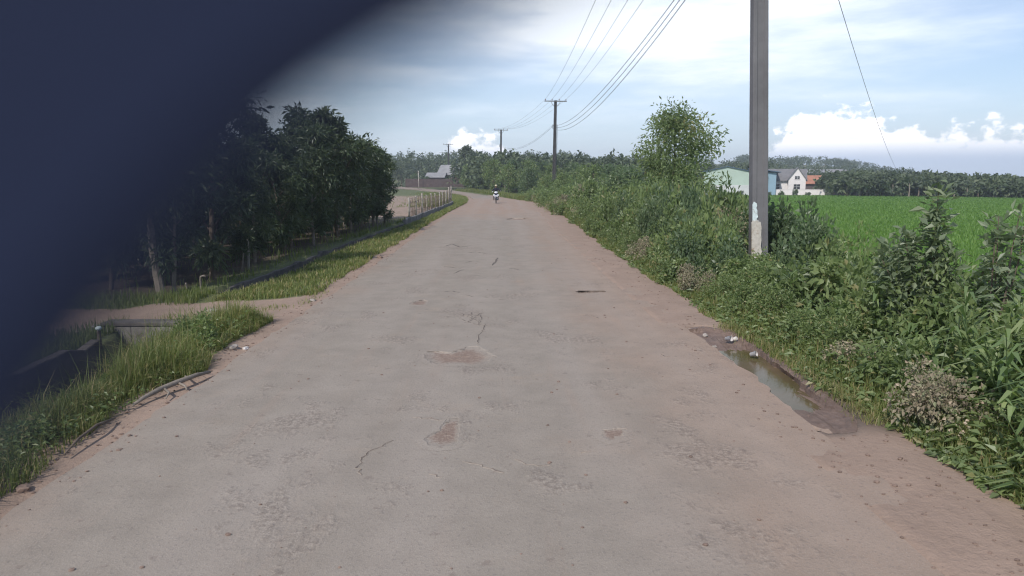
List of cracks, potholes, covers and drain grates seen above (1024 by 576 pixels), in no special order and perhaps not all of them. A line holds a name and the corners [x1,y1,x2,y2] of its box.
pothole [415,414,471,451]
crack [463,459,551,473]
crack [353,440,393,475]
pothole [688,326,858,434]
crack [443,244,520,344]
pothole [416,344,504,368]
